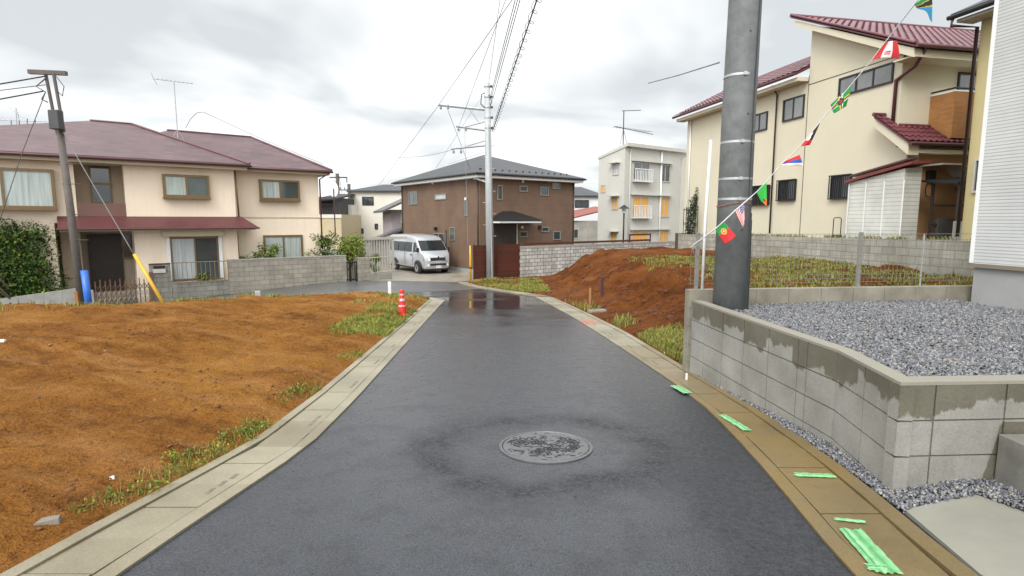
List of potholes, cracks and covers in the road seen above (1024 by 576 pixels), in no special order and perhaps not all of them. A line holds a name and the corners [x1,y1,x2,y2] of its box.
manhole cover [499,431,593,464]
